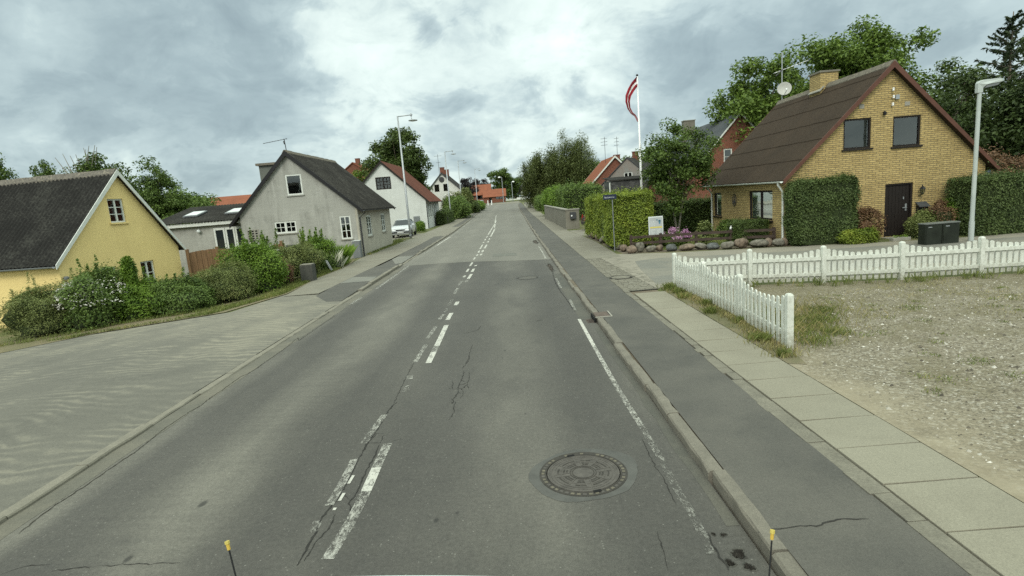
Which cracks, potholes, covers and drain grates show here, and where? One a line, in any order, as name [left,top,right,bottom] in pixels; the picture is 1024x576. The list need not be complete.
crack [751,518,868,533]
crack [297,369,410,565]
manhole cover [529,449,638,502]
crack [450,326,481,417]
crack [2,562,178,574]
